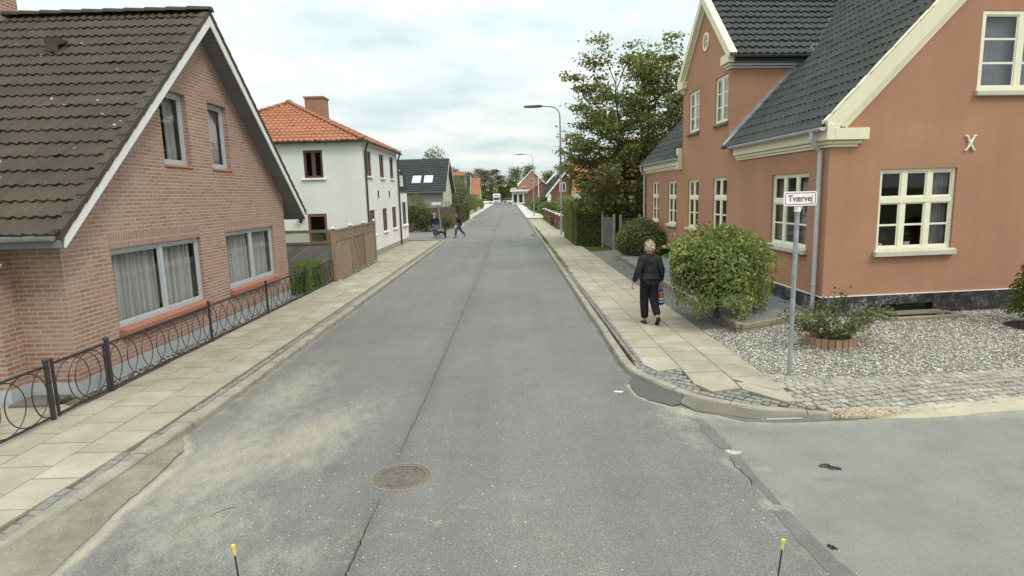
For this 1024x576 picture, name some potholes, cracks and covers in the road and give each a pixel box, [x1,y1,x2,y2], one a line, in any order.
manhole cover [370,463,432,491]
